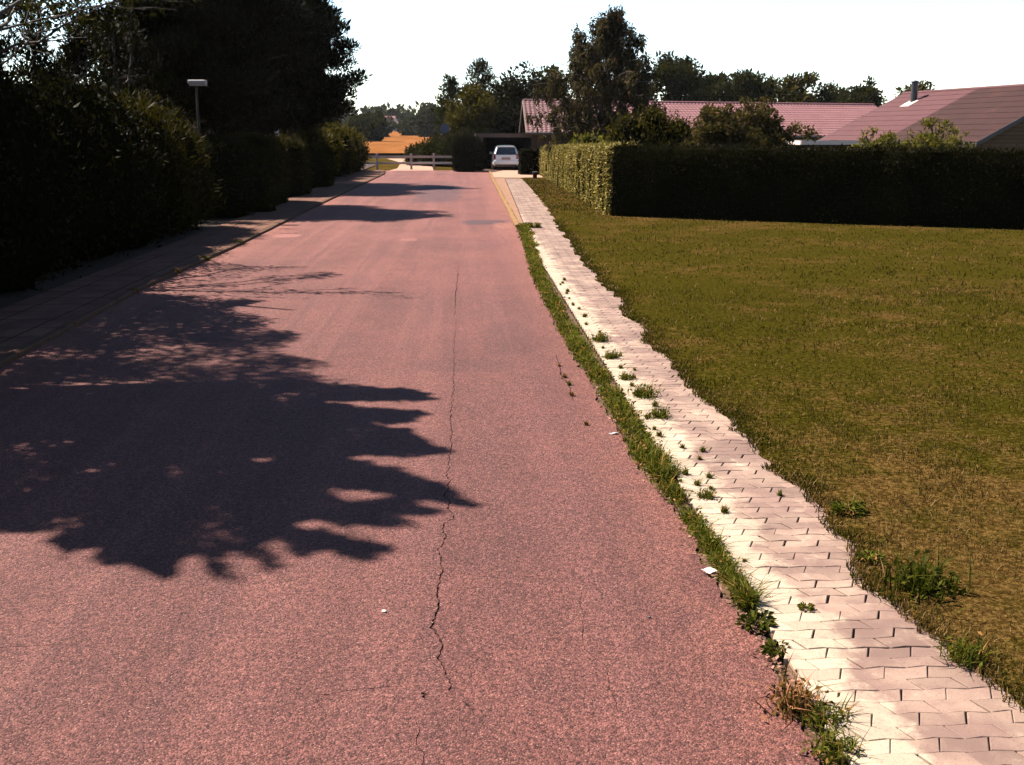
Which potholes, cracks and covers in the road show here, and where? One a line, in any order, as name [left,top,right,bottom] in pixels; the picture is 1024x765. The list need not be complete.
crack [421,323,474,714]
crack [557,573,618,711]
